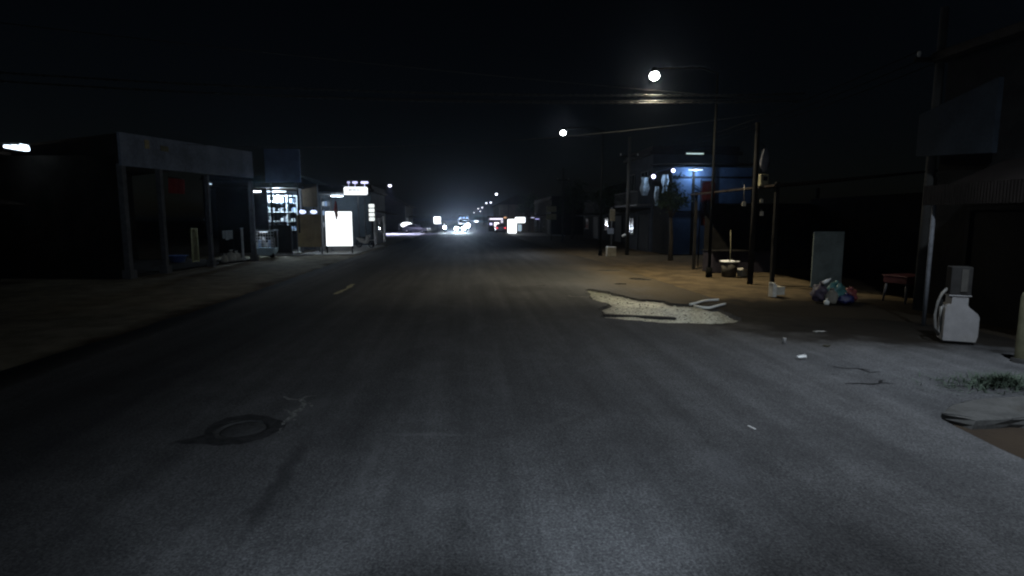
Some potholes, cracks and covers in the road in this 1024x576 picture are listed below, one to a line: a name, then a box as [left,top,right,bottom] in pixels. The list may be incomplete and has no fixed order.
manhole cover [181,414,286,445]
crack [277,395,317,433]
crack [833,366,894,385]
